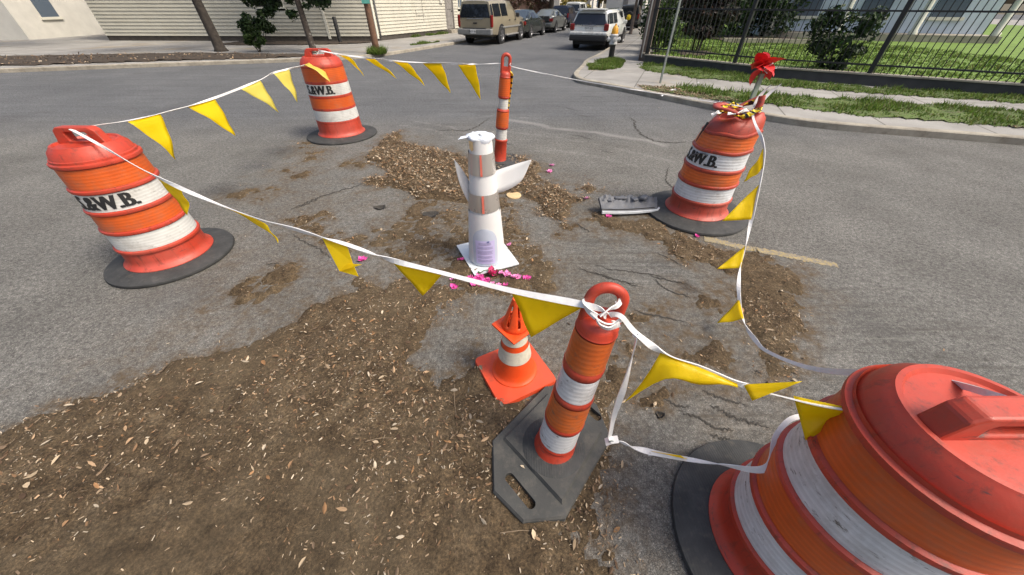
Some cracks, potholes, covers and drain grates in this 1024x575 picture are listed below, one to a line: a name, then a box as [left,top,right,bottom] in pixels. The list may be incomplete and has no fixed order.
crack [286,183,361,212]
crack [582,254,689,324]
crack [665,390,769,440]
